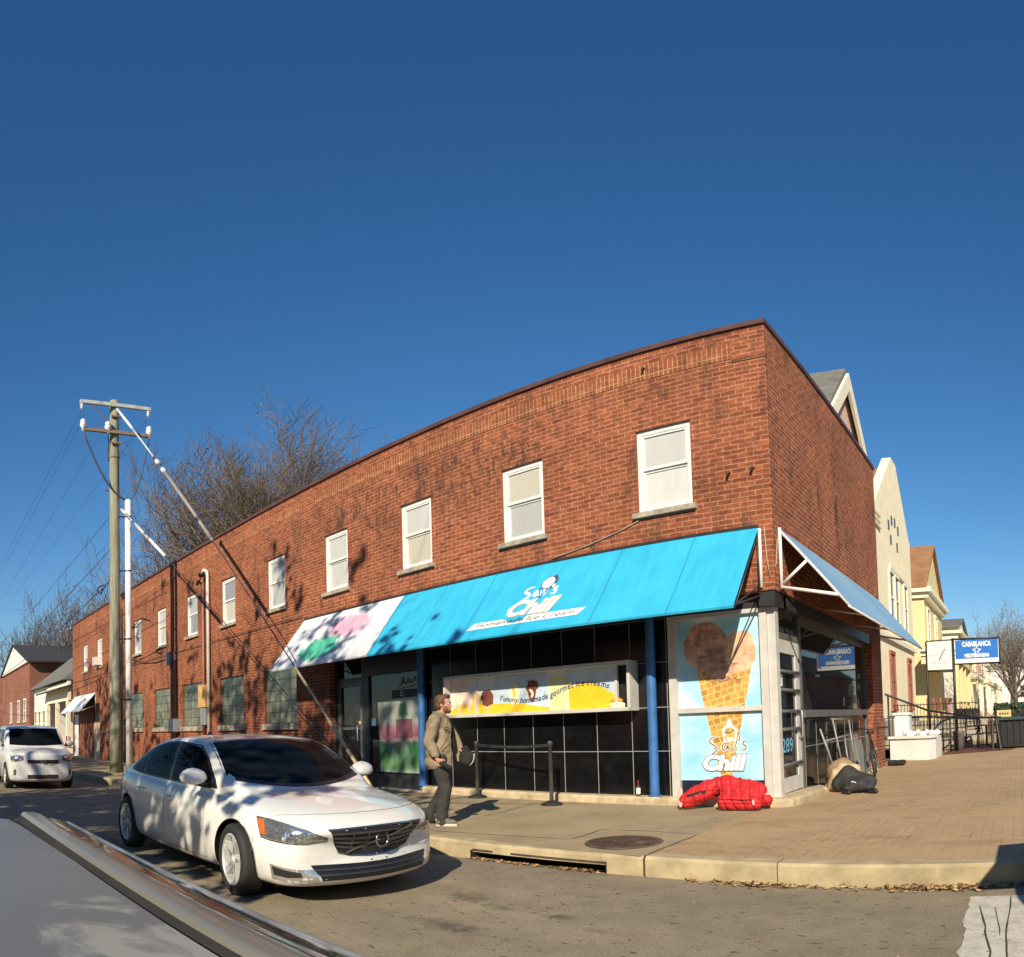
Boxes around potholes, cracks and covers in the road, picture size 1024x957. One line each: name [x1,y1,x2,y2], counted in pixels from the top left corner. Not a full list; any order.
manhole cover [584,835,664,849]
crack [980,895,1012,957]
drain grate [470,848,607,874]
